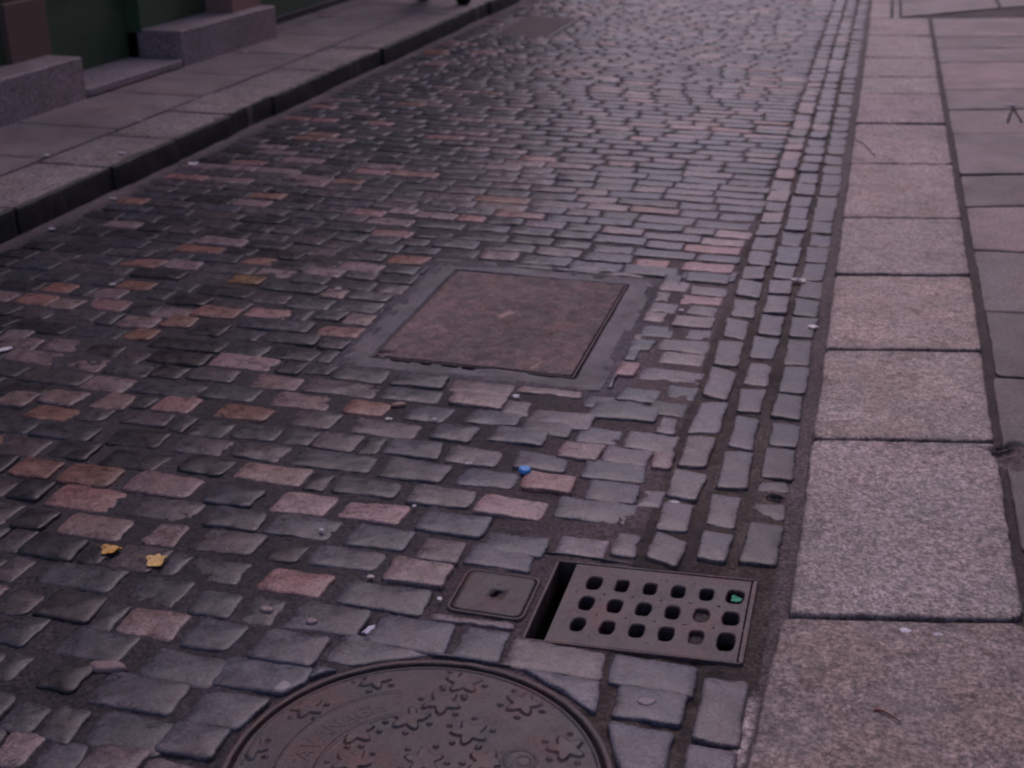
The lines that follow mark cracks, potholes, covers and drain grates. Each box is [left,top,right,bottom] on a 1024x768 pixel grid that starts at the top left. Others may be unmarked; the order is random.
manhole cover [220,660,614,768]
manhole cover [342,263,656,392]
drain grate [521,560,758,667]
utility cover [447,569,540,622]
